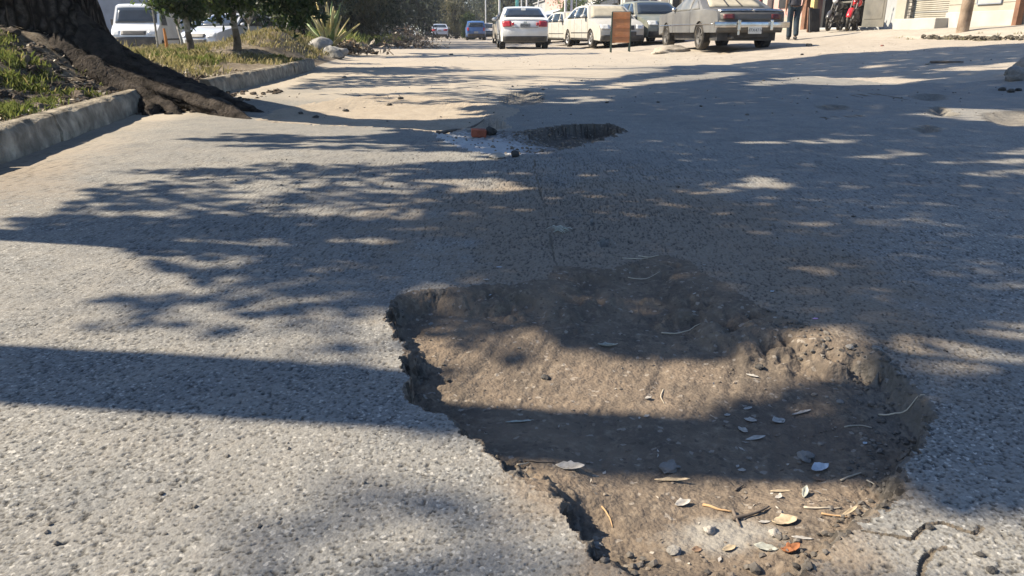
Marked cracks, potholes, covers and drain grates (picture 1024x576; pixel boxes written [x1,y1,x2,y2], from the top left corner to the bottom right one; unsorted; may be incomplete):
pothole [431,123,628,156]
pothole [497,90,546,106]
pothole [382,254,939,576]
crack [860,521,986,576]
pothole [924,106,960,118]
